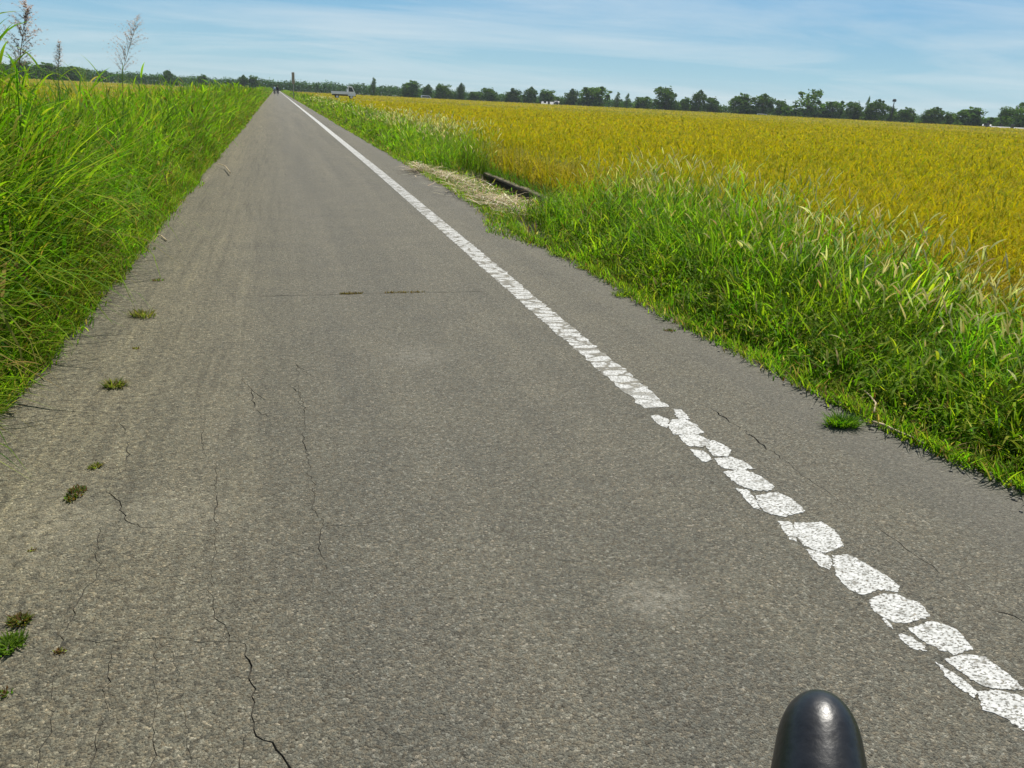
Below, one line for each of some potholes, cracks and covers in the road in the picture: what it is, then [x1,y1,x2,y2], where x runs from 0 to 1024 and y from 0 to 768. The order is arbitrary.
crack [714,410,938,572]
crack [37,419,291,768]
crack [254,364,388,569]
